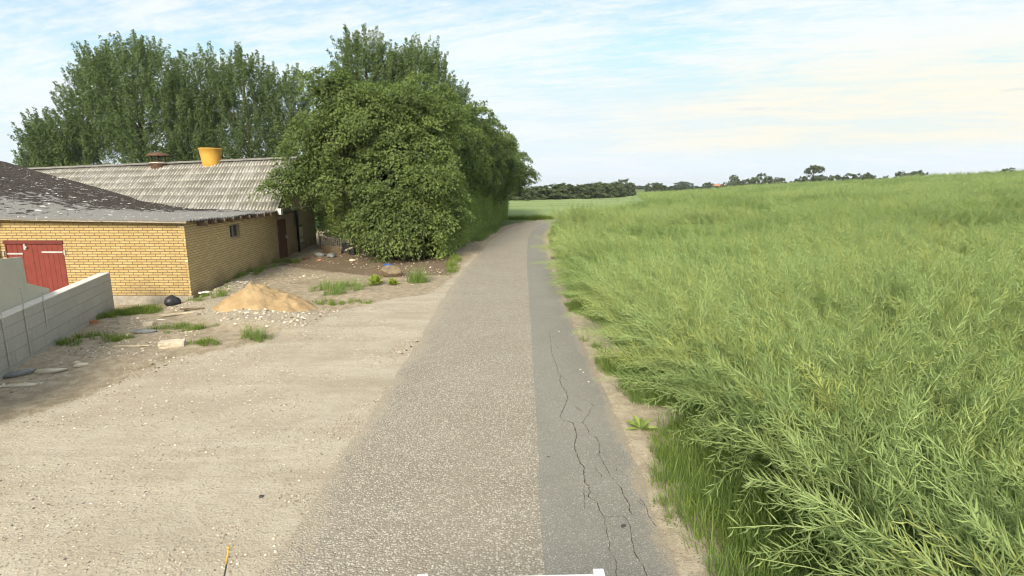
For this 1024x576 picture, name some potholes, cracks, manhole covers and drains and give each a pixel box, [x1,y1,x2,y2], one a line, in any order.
crack [549,333,656,576]
